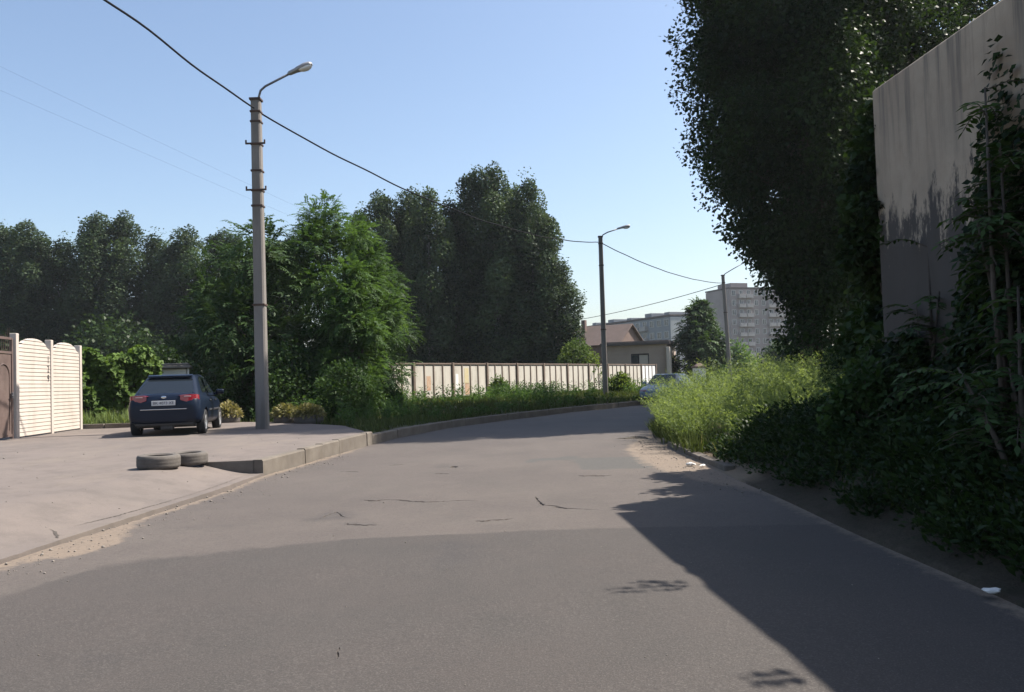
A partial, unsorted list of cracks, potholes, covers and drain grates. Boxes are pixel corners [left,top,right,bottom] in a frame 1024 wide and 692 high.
crack [535,497,593,510]
